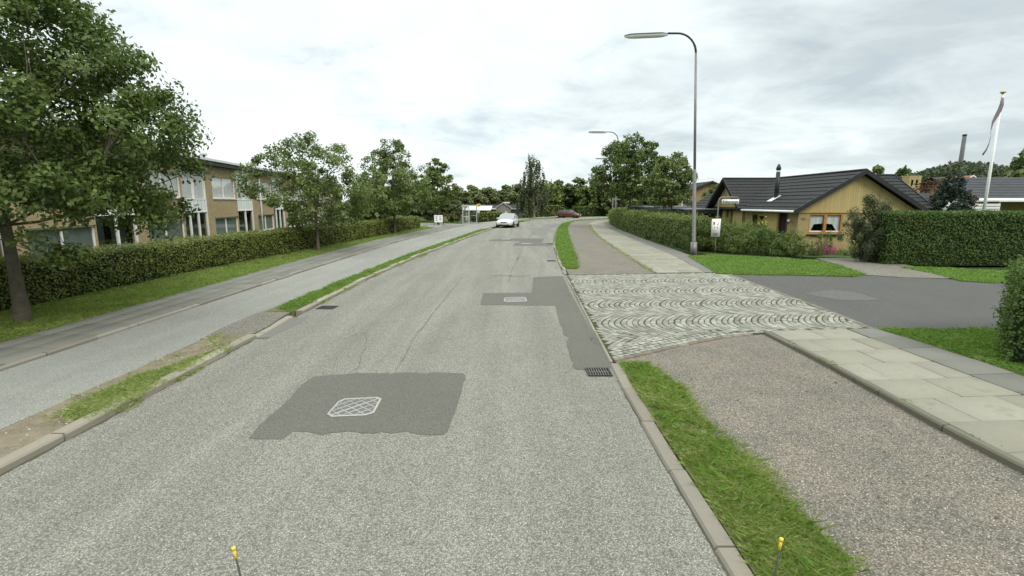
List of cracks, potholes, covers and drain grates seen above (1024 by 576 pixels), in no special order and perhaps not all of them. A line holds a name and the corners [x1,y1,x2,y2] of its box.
manhole cover [327,397,382,417]
drain grate [585,367,613,376]
crack [396,277,463,370]
